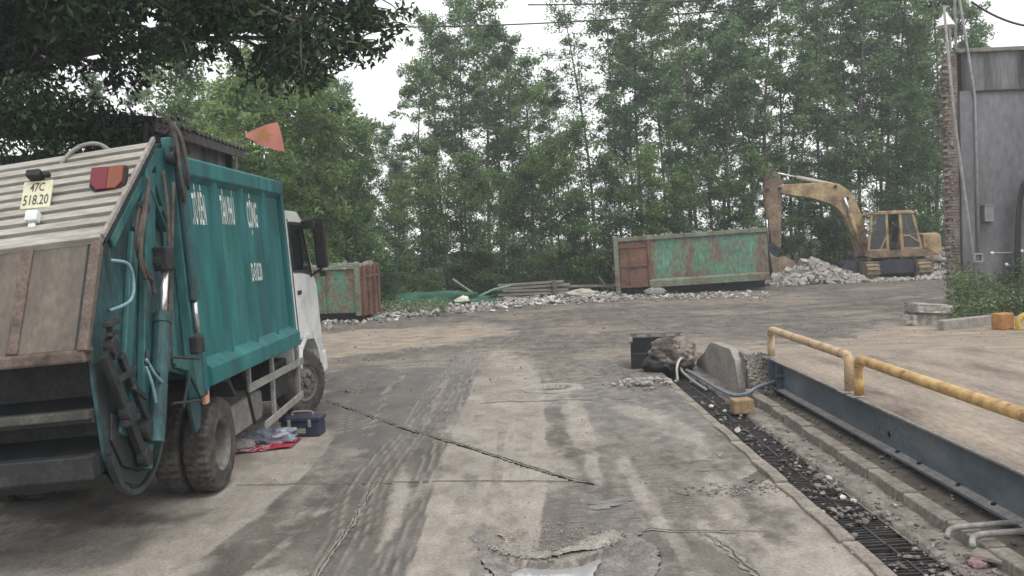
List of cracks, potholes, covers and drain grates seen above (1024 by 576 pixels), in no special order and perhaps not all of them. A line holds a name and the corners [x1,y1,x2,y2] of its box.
drain grate [790,481,864,513]
drain grate [826,510,911,549]
drain grate [706,409,753,424]
drain grate [868,544,956,576]
crack [246,396,697,576]
drain grate [681,387,719,398]
drain grate [741,439,797,460]
crack [635,527,762,576]
pothole [469,520,662,576]
drain grate [672,379,706,388]
drain grate [692,397,730,410]
drain grate [764,458,822,483]
